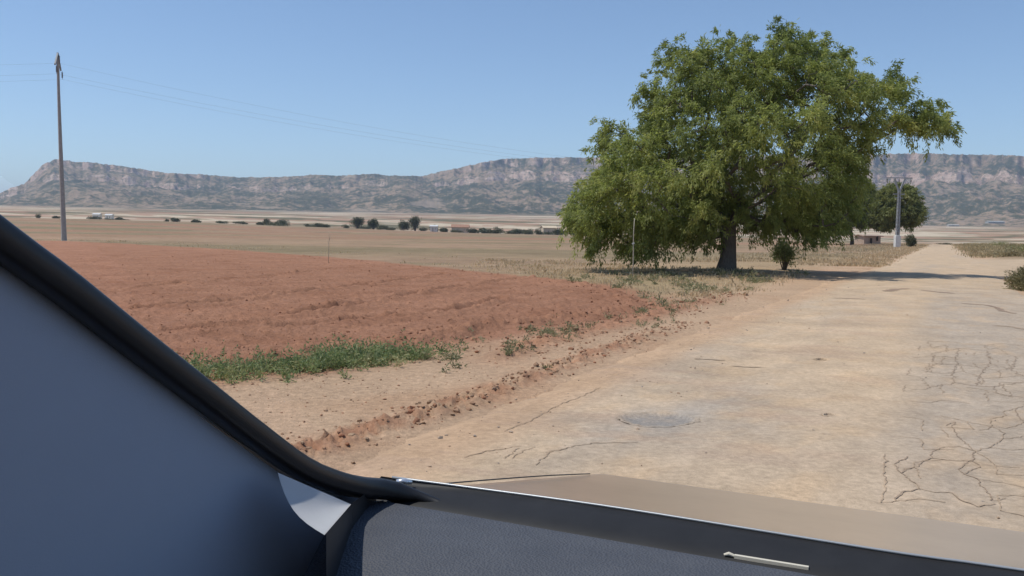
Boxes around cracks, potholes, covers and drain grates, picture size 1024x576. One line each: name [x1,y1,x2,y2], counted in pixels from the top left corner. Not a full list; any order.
crack [903,341,1023,402]
crack [465,387,631,465]
crack [882,288,1023,329]
crack [880,400,1024,516]
